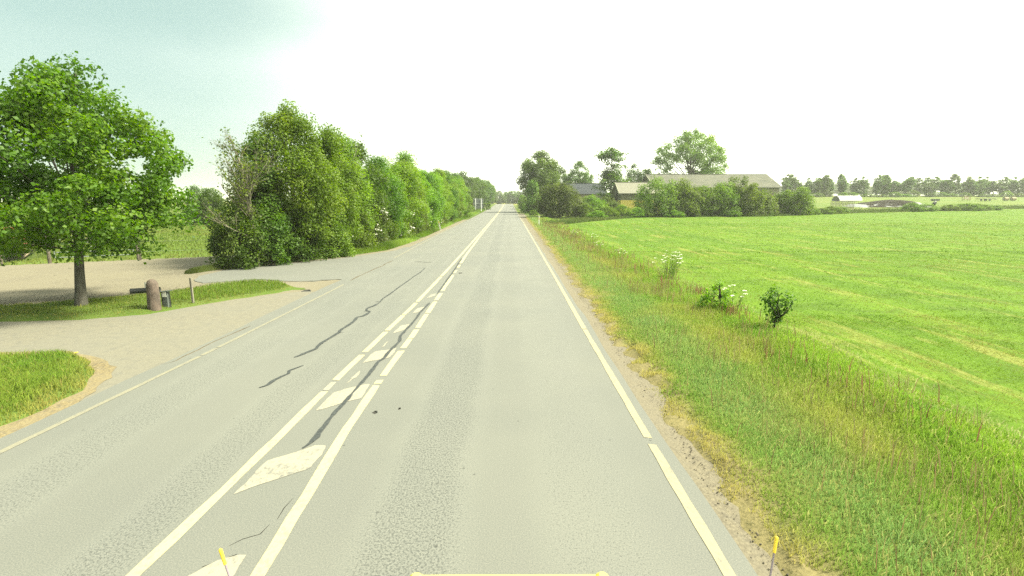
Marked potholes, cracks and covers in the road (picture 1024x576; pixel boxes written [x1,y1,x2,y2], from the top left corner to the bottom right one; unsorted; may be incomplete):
crack [203,503,289,567]
